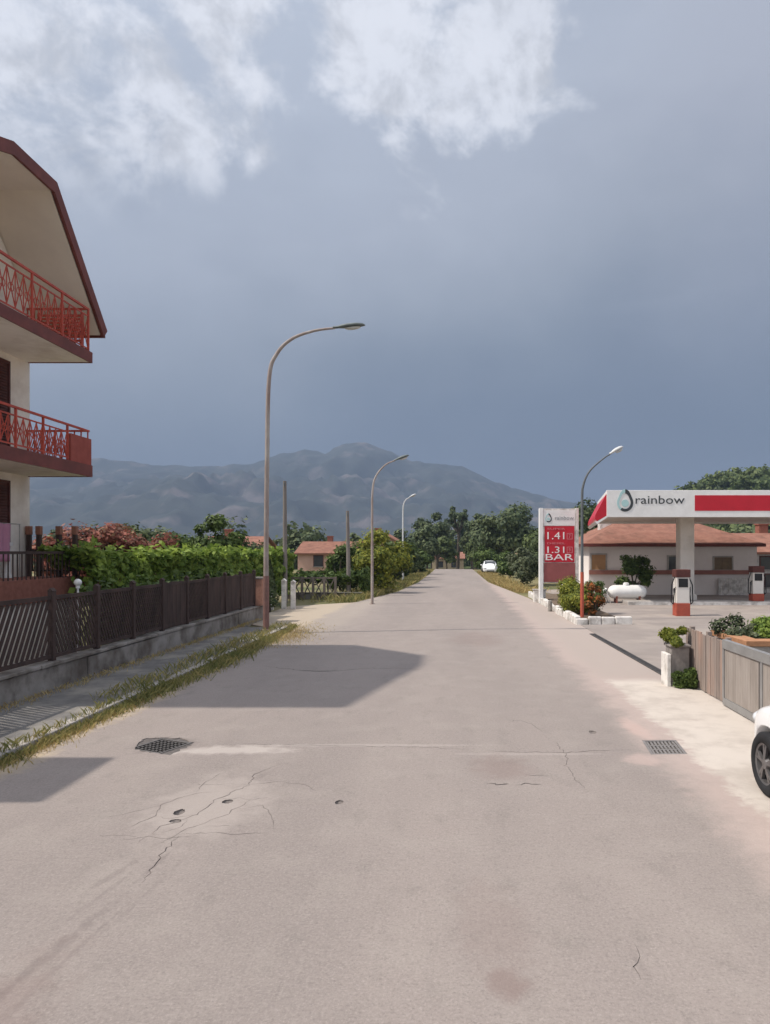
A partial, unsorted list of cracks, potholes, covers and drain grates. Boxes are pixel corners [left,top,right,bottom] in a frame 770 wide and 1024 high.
drain grate [642,740,687,754]
crack [95,765,316,882]
crack [262,743,608,791]
